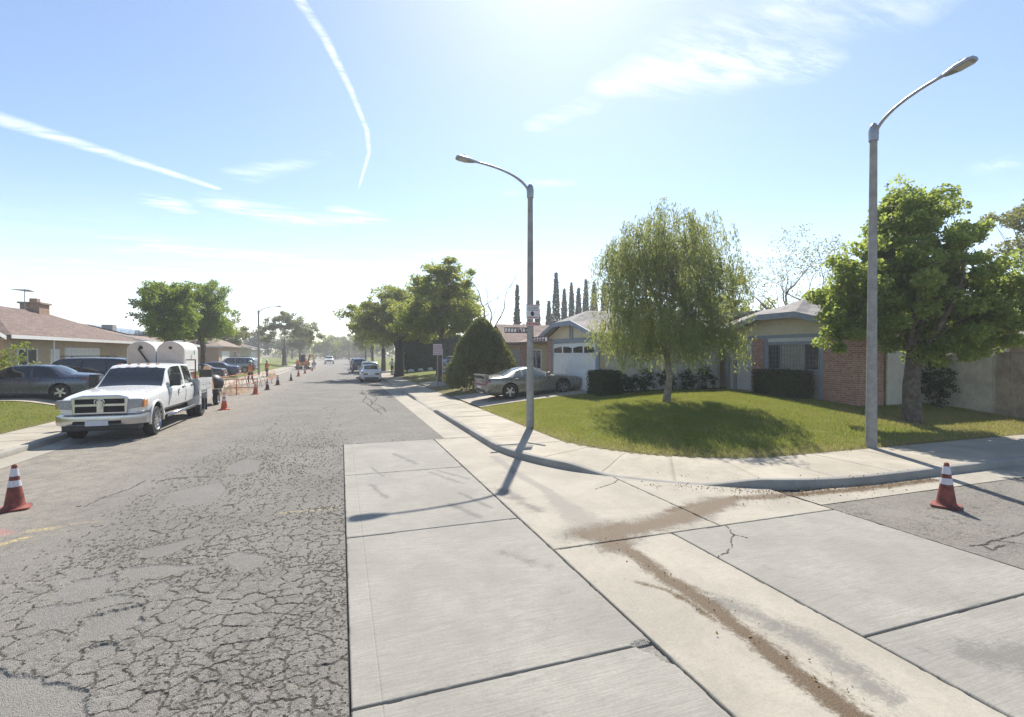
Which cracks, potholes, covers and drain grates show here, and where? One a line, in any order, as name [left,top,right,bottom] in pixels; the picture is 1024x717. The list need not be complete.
crack [717,526,747,560]
crack [361,390,386,414]
crack [0,410,426,717]
crack [969,532,1024,551]
